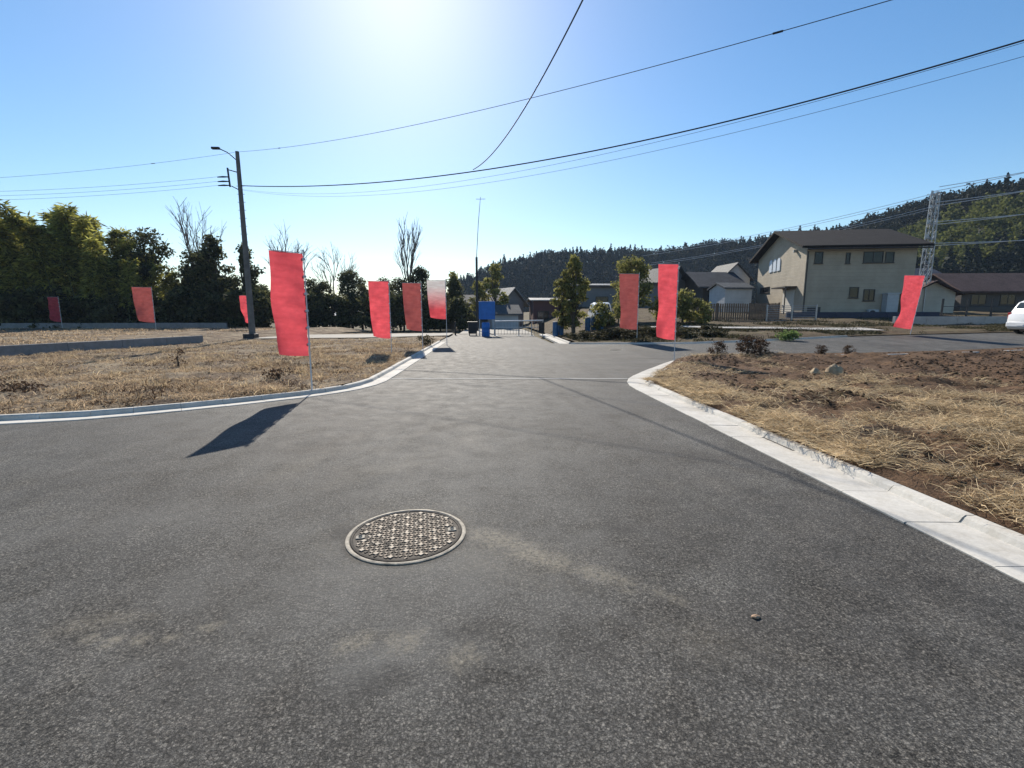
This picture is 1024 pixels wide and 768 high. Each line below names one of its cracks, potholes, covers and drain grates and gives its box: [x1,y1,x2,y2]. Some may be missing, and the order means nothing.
manhole cover [345,509,466,565]
